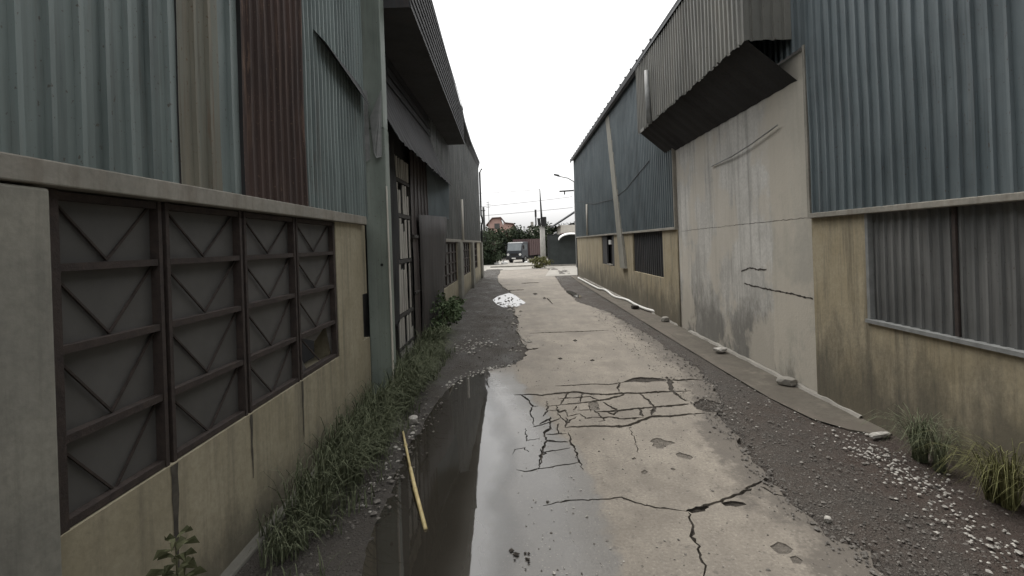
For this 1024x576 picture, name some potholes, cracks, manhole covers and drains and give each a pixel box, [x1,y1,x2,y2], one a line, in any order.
pothole [693,399,724,415]
pothole [770,542,793,554]
pothole [650,438,675,449]
crack [525,378,686,468]
